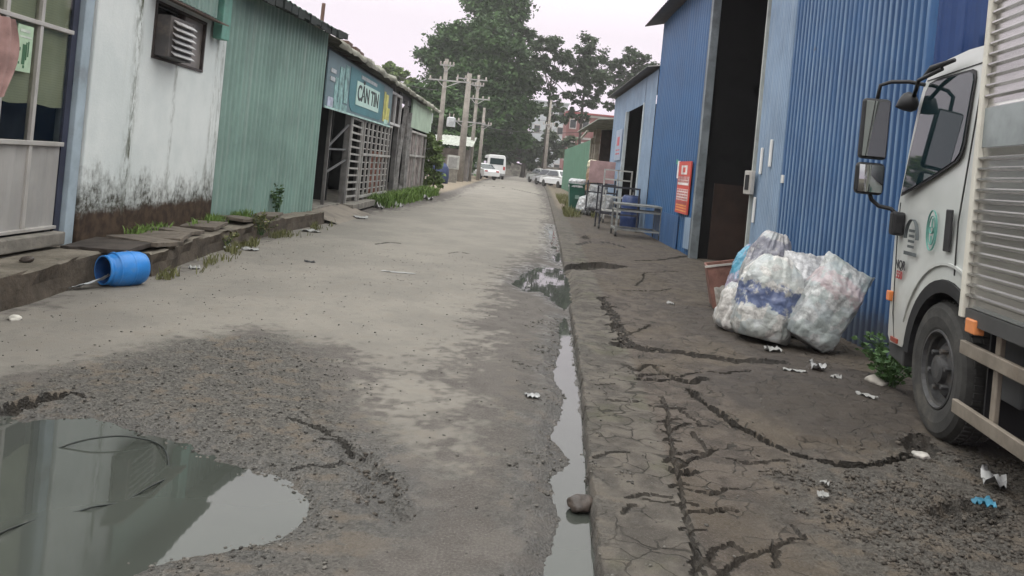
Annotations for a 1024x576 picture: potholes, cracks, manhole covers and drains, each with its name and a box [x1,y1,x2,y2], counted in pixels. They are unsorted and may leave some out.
pothole [504,264,571,311]
crack [286,417,355,472]
crack [575,241,911,576]
pothole [0,398,365,576]
pothole [901,432,942,459]
